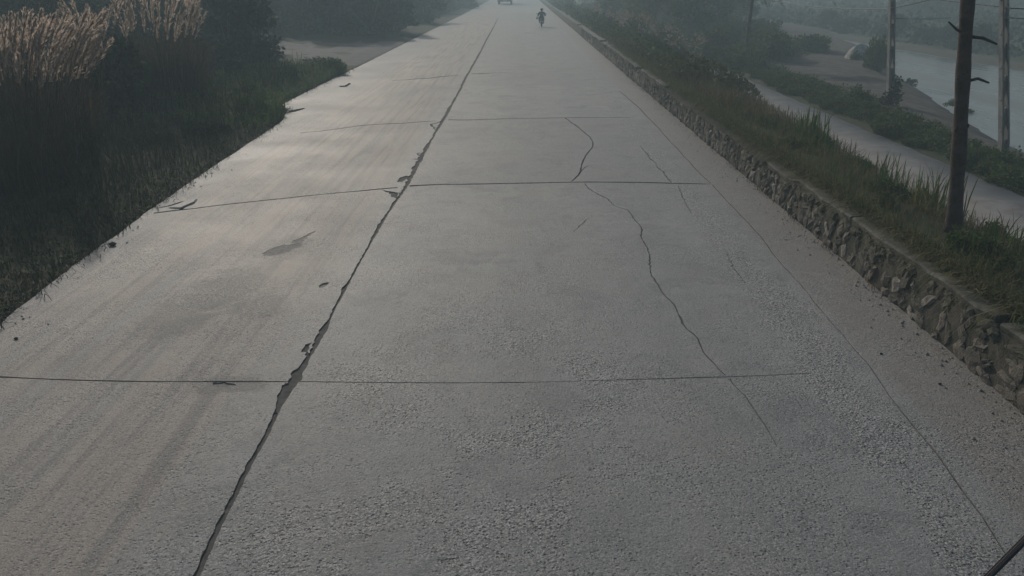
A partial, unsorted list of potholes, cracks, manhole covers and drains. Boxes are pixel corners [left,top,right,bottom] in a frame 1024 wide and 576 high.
crack [0,19,811,576]
